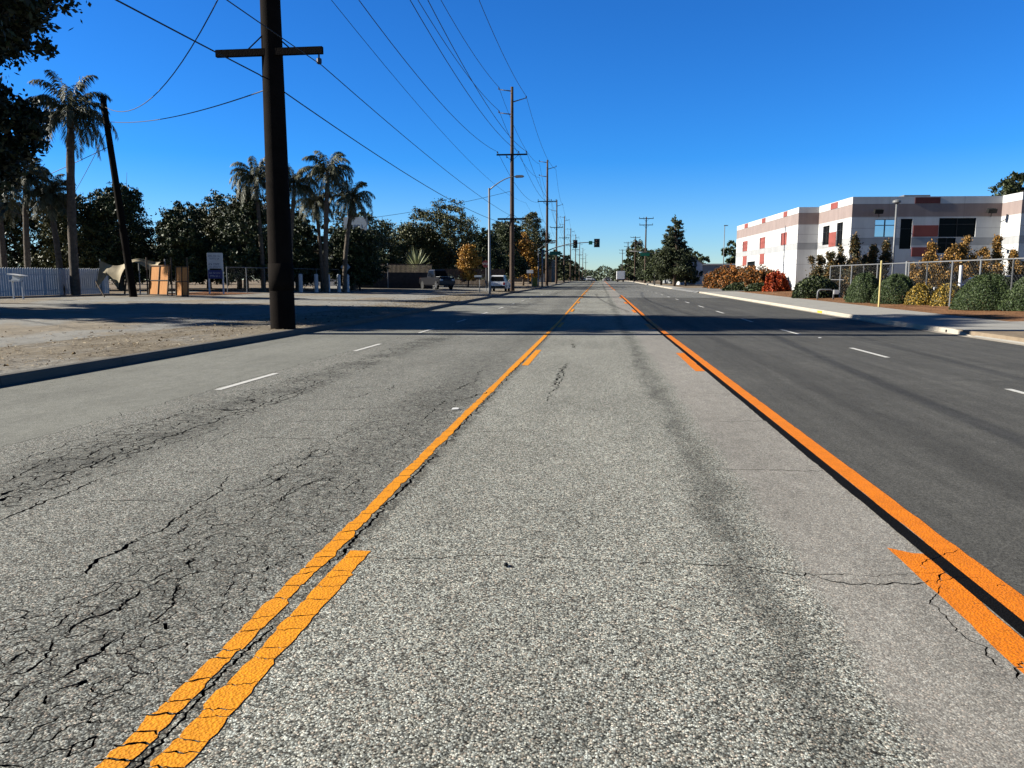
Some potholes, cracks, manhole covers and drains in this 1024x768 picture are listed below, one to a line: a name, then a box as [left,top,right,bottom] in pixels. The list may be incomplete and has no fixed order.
crack [0,338,520,768]
crack [376,551,1023,680]
crack [547,344,575,401]
